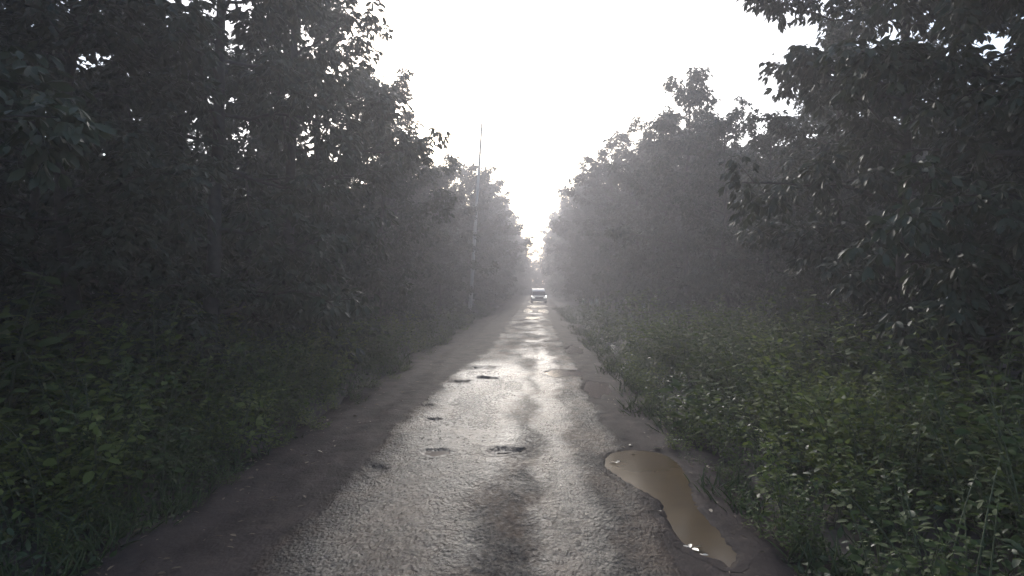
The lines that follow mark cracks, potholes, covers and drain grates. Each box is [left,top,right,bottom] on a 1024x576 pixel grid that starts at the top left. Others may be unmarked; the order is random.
pothole [480,444,534,456]
pothole [540,369,587,378]
pothole [344,461,398,480]
pothole [415,446,458,458]
pothole [594,448,753,572]
